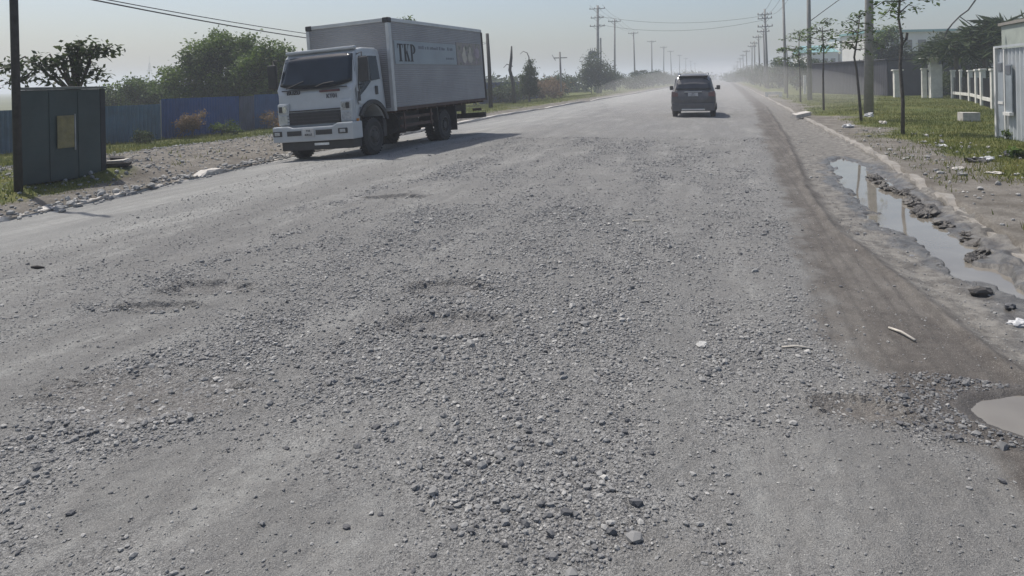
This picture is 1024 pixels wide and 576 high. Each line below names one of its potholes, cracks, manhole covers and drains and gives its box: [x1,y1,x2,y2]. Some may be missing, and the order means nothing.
pothole [152,278,260,296]
pothole [110,300,201,312]
pothole [403,278,497,297]
pothole [807,394,920,425]
pothole [950,388,1024,438]
pothole [378,310,520,337]
